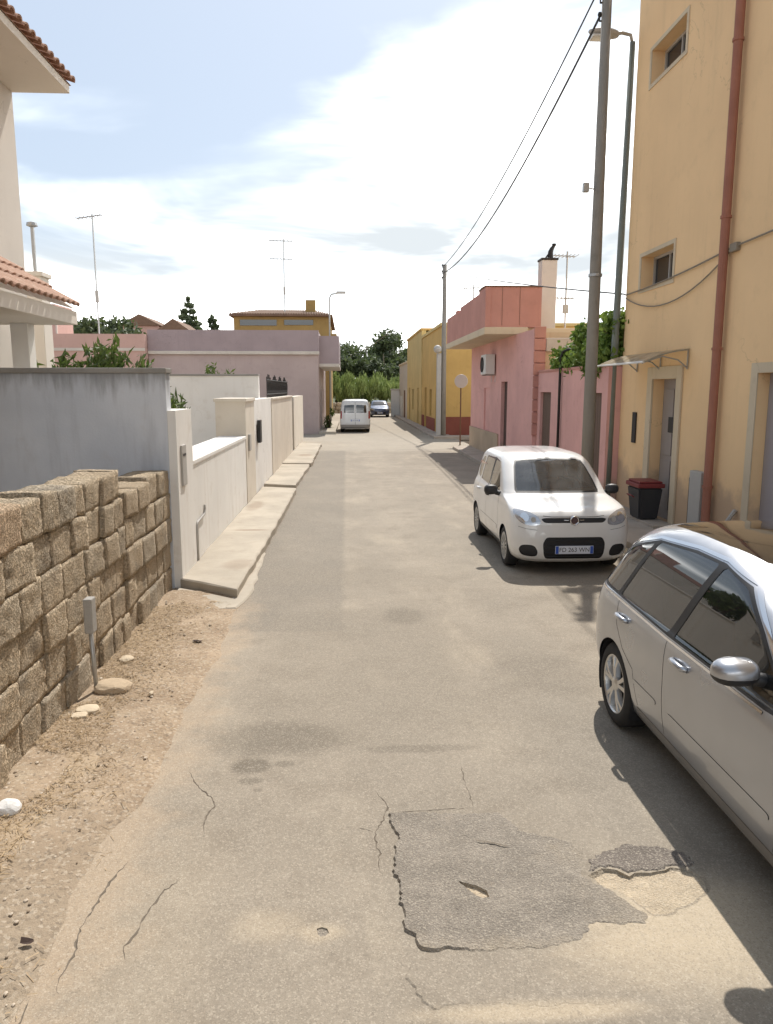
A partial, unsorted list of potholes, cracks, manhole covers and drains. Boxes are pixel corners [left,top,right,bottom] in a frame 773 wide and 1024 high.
pothole [460,882,489,898]
crack [189,772,215,831]
crack [56,861,177,995]
crack [360,793,389,875]
pothole [588,867,711,916]
